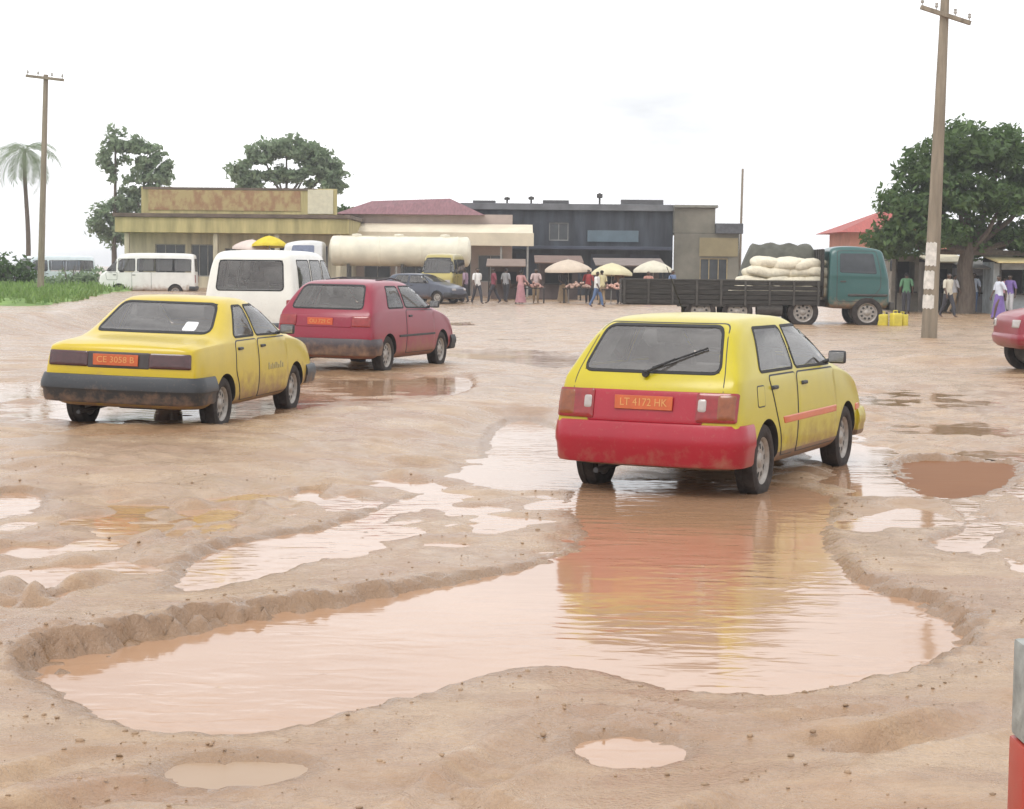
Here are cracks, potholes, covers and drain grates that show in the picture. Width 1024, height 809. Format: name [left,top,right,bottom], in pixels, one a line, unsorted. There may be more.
pothole [129,744,332,798]
pothole [0,477,995,738]
pothole [886,452,1024,499]
pothole [543,721,715,773]
